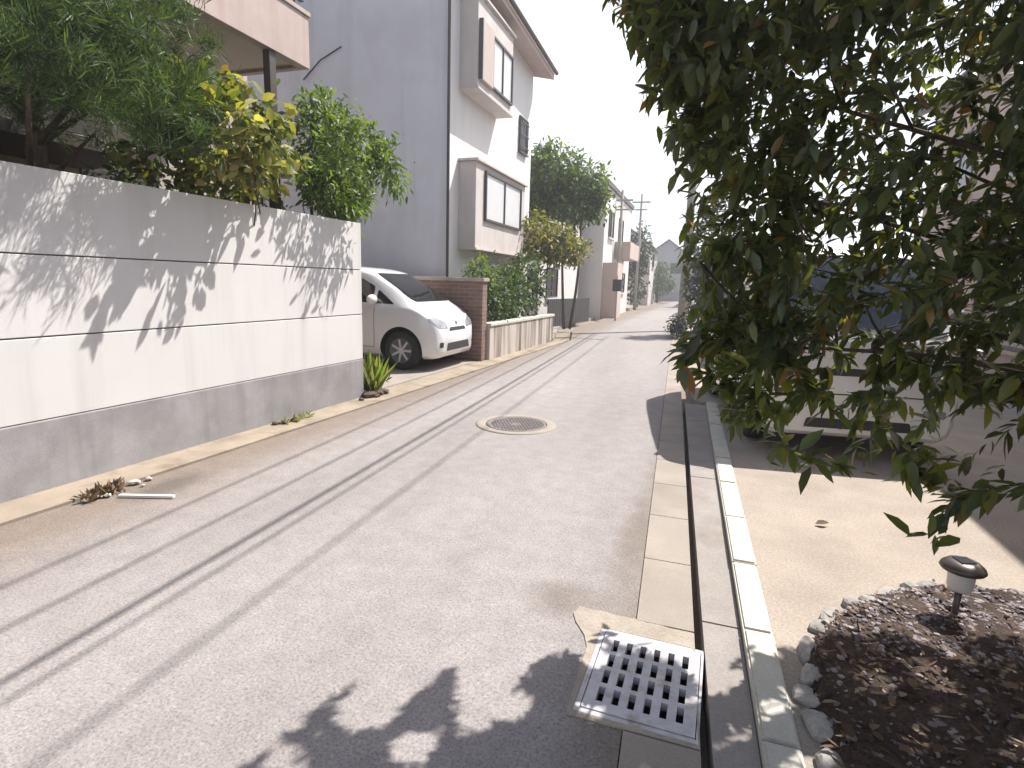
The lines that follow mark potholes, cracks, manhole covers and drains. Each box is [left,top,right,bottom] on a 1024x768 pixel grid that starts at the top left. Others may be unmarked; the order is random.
drain grate [573,628,704,745]
manhole cover [476,415,556,435]
